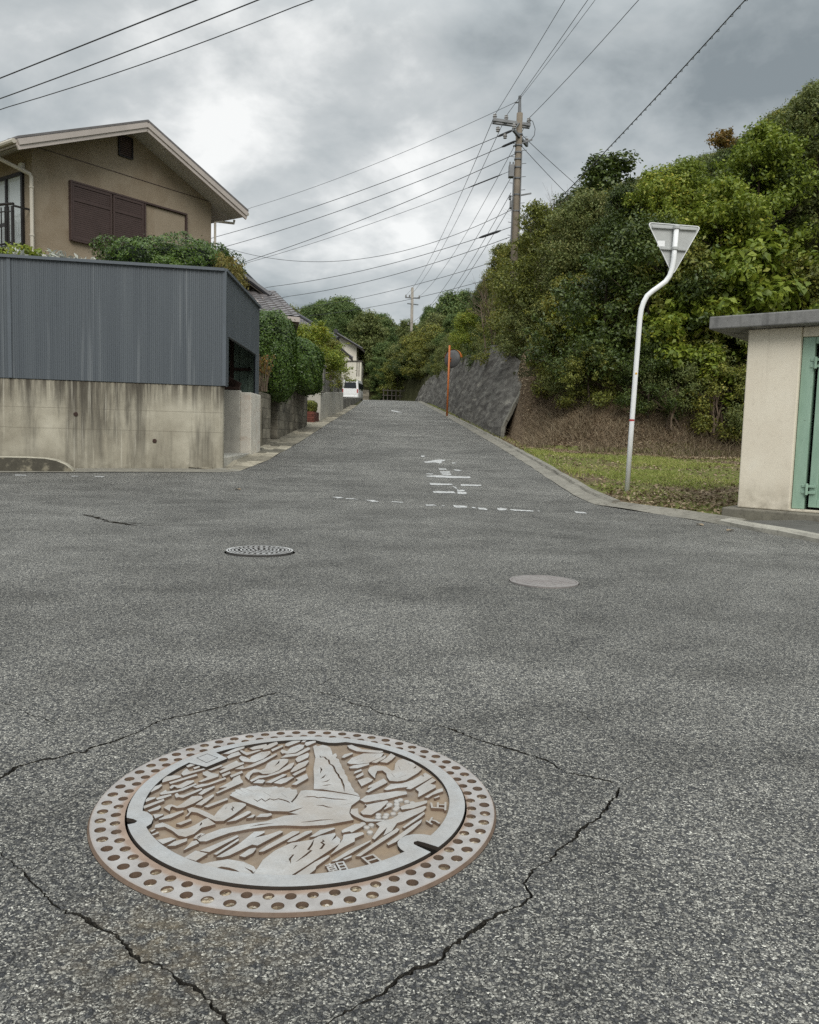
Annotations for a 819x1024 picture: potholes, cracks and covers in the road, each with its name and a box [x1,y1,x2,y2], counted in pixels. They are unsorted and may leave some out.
manhole cover [87,730,496,918]
manhole cover [509,575,579,589]
crack [0,852,229,1024]
crack [307,678,648,1024]
crack [82,514,136,526]
crack [0,693,275,779]
